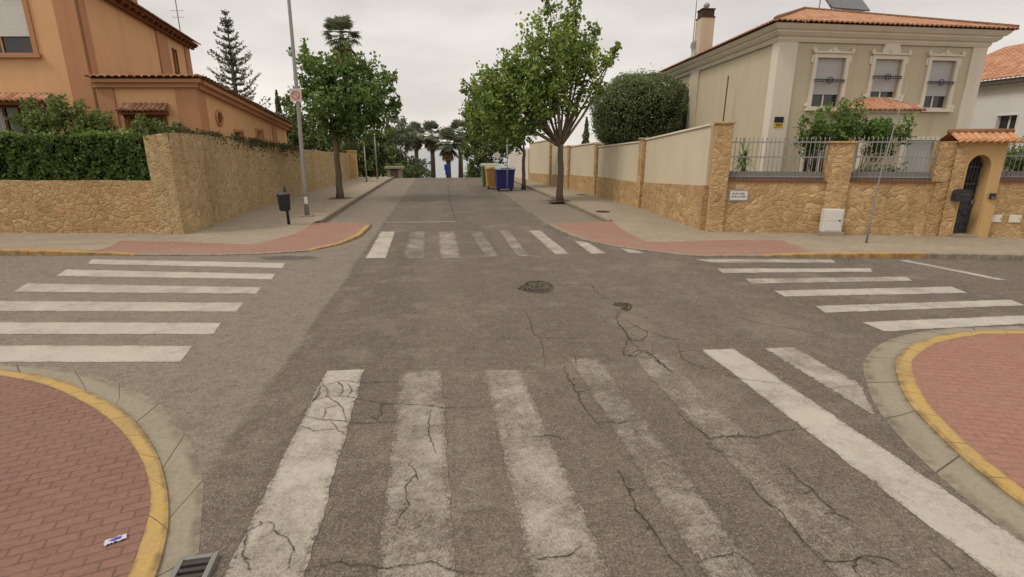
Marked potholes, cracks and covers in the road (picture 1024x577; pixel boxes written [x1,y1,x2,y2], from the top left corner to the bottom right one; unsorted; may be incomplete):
crack [305,381,480,445]
crack [824,551,954,571]
pothole [613,302,633,311]
crack [319,560,487,574]
drain grate [169,552,219,577]
crack [618,314,706,373]
pothole [518,280,555,294]
crack [618,471,678,564]
crack [676,410,804,448]
